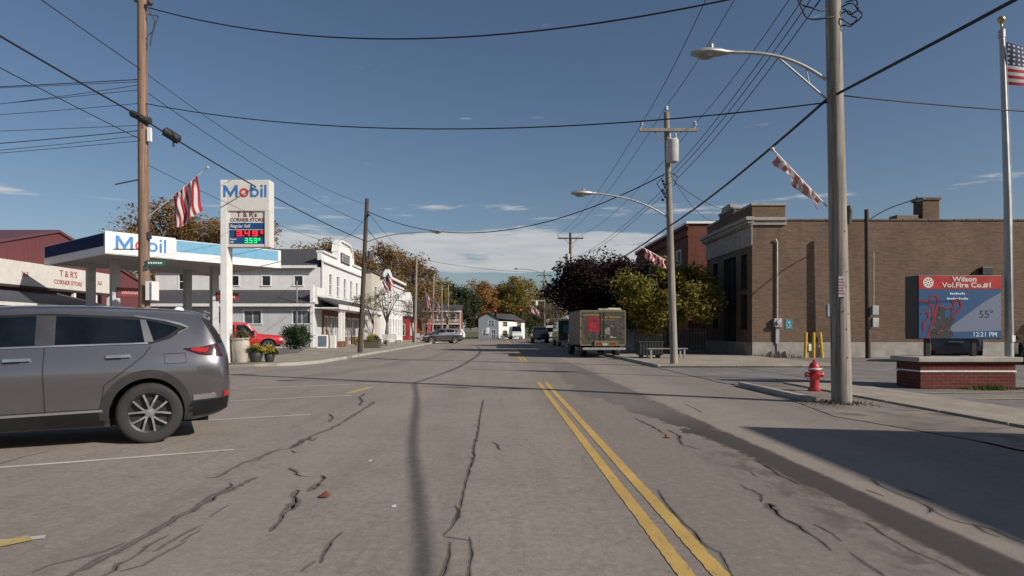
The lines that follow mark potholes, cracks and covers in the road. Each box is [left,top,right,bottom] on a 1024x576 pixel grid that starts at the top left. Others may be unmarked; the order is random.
crack [740,461,960,576]
crack [33,393,375,576]
crack [633,417,702,449]
crack [868,479,1024,543]
crack [441,400,500,576]
